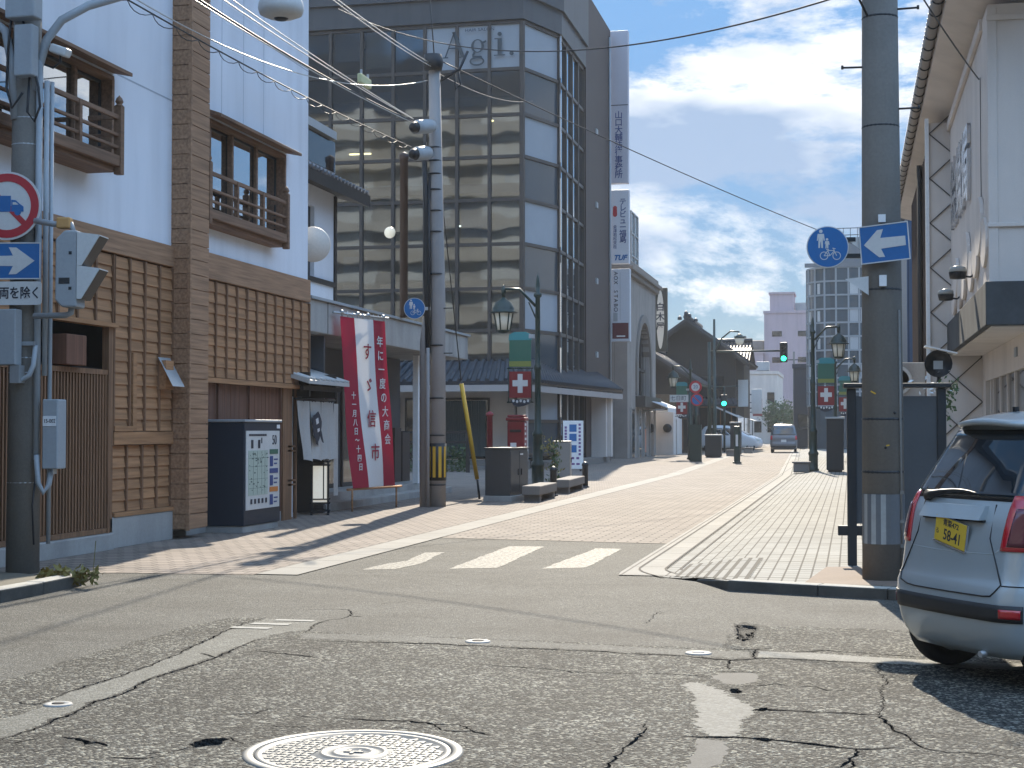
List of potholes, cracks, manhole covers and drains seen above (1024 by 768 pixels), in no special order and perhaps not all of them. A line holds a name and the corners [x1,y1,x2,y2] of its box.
crack [335,641,1020,768]
pothole [189,738,230,748]
manhole cover [242,729,464,768]
pothole [735,625,757,642]
